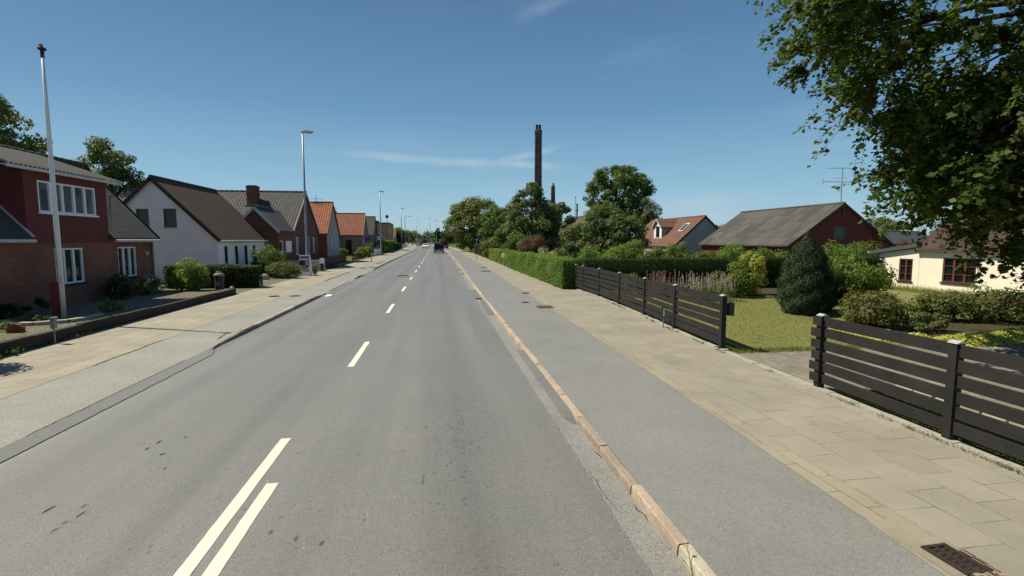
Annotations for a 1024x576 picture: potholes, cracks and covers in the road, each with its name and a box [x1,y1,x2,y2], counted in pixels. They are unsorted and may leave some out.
drain grate [921,543,1008,576]
